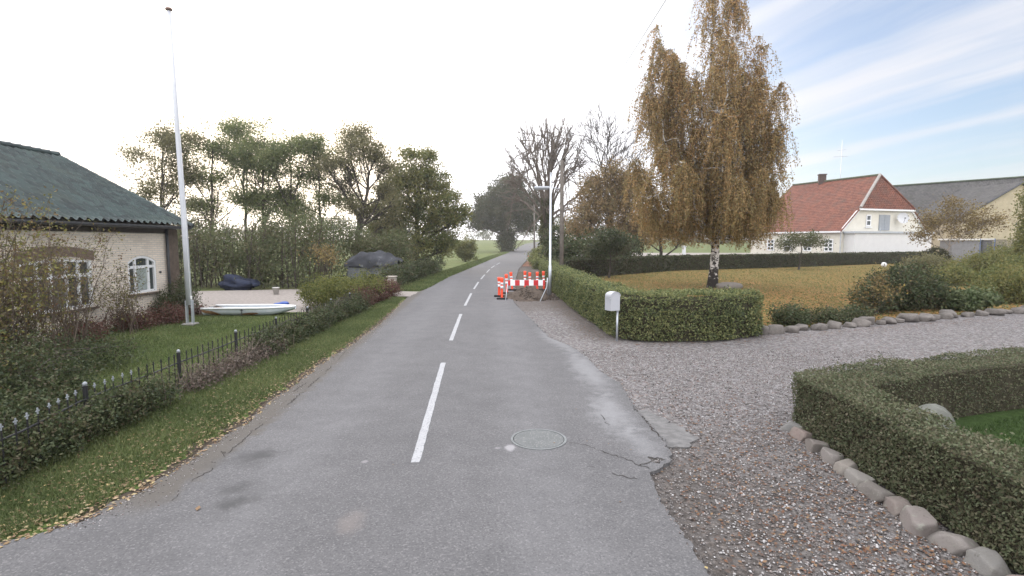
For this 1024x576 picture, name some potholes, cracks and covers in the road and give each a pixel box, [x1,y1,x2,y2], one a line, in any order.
manhole cover [511,429,567,450]
